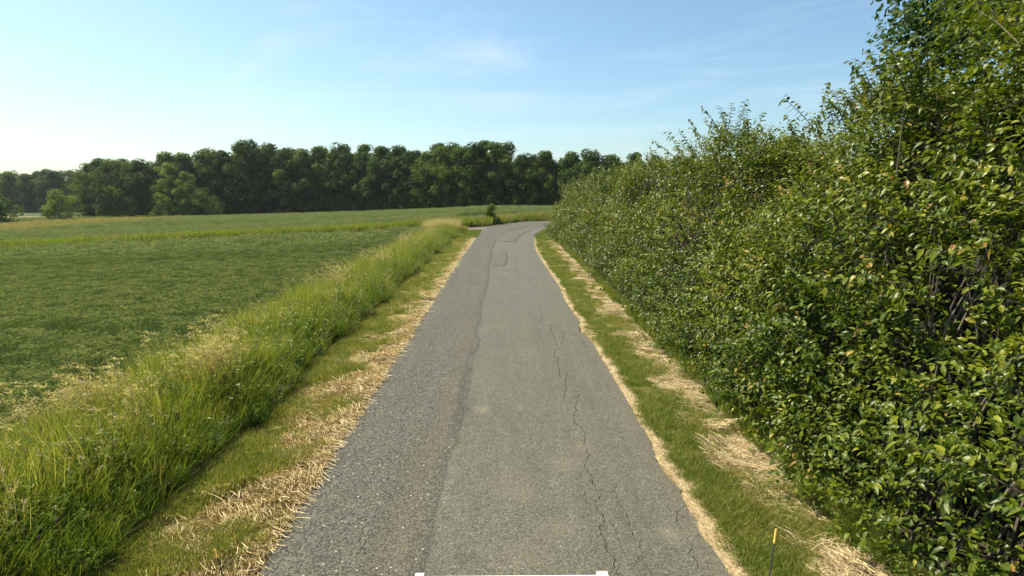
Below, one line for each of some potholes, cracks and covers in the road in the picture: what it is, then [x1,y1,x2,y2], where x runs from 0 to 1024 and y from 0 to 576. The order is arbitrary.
crack [559,370,650,576]
